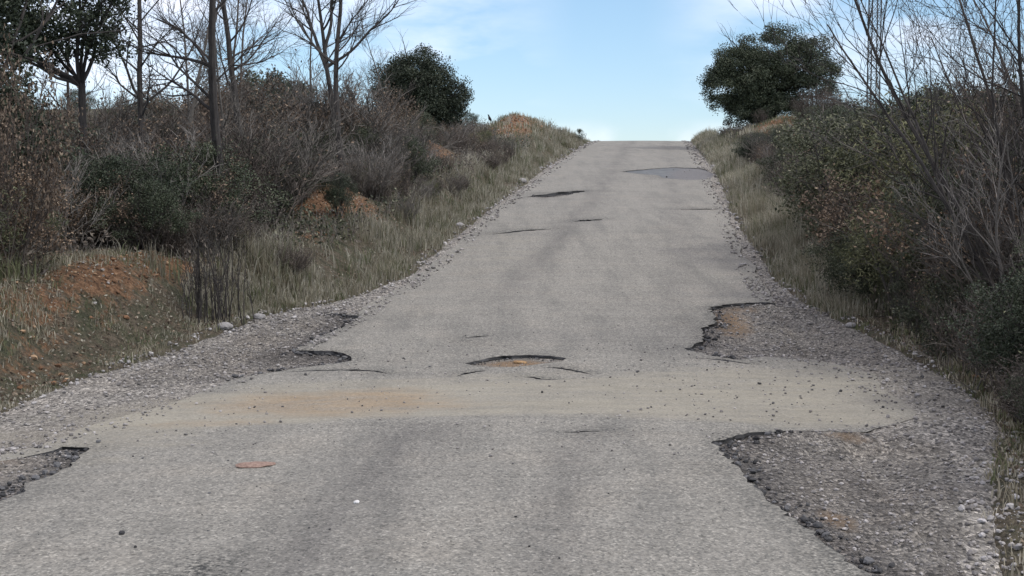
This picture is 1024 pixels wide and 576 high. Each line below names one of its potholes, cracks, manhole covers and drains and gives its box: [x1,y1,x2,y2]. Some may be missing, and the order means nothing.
pothole [465,355,566,367]
crack [529,367,589,380]
pothole [685,302,885,365]
pothole [711,429,967,576]
pothole [0,447,89,501]
